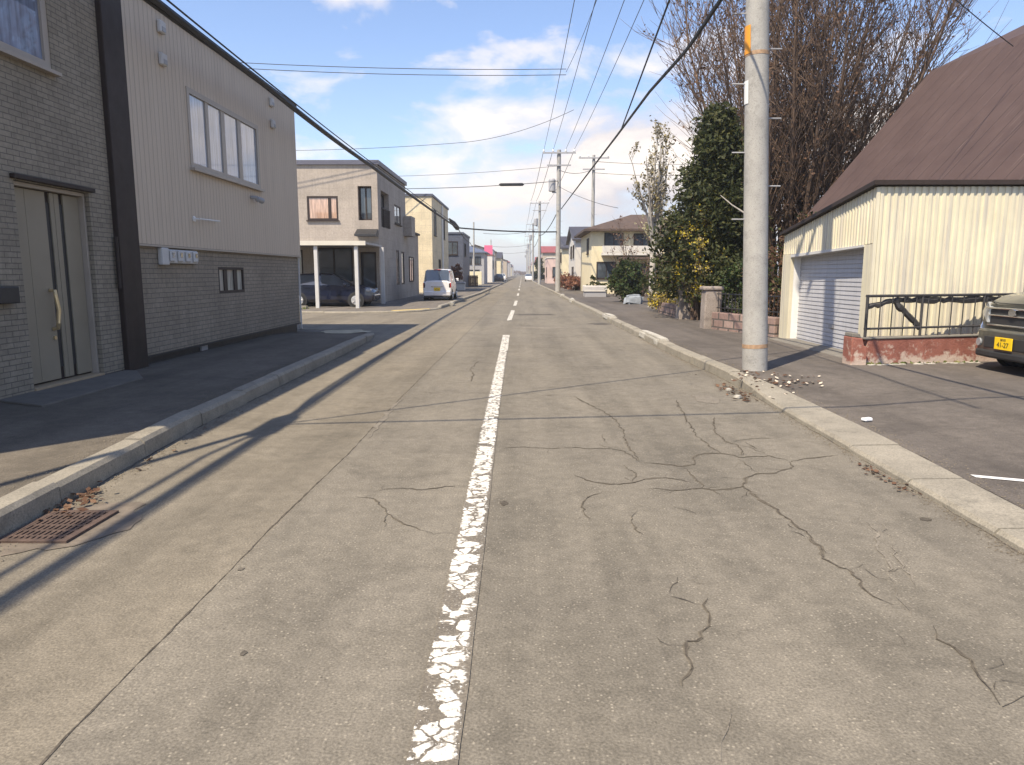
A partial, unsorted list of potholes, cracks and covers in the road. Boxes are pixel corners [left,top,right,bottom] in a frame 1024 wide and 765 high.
crack [650,576,722,686]
drain grate [0,510,119,543]
crack [933,626,1024,707]
crack [506,393,911,605]
crack [363,485,456,535]
